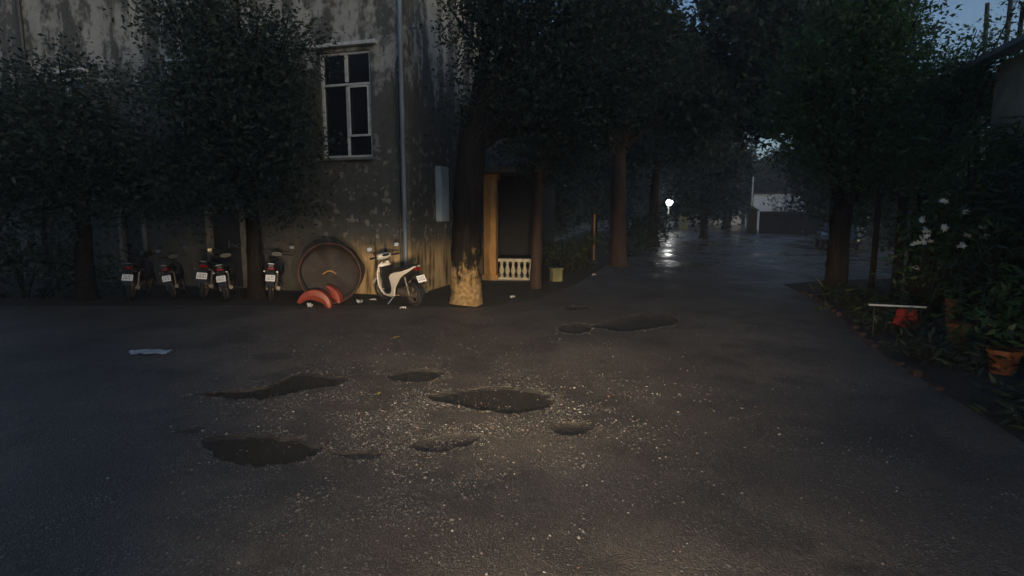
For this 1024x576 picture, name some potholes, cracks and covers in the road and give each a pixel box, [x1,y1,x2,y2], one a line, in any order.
pothole [593,314,679,332]
pothole [332,450,382,459]
pothole [193,373,348,400]
pothole [387,368,443,382]
pothole [411,433,480,452]
pothole [558,323,594,334]
pothole [201,433,325,467]
pothole [551,422,594,436]
pothole [426,386,557,414]
